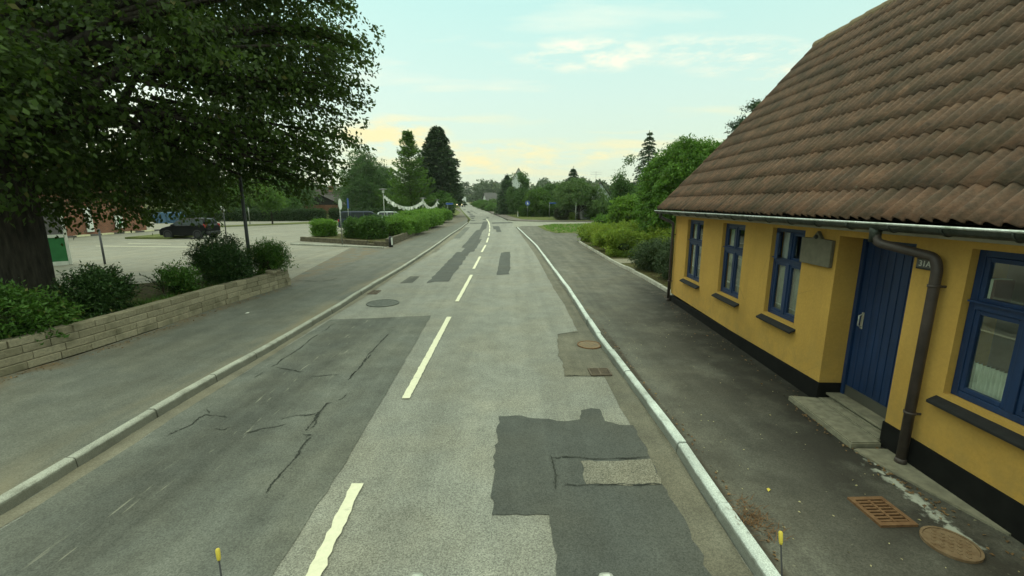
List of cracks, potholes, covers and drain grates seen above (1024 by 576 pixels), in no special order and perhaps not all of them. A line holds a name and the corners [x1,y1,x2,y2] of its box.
drain grate [587,368,612,376]
manhole cover [919,526,985,564]
crack [171,410,227,434]
drain grate [847,496,919,528]
crack [247,324,389,492]
manhole cover [366,299,399,307]
manhole cover [577,340,601,349]
